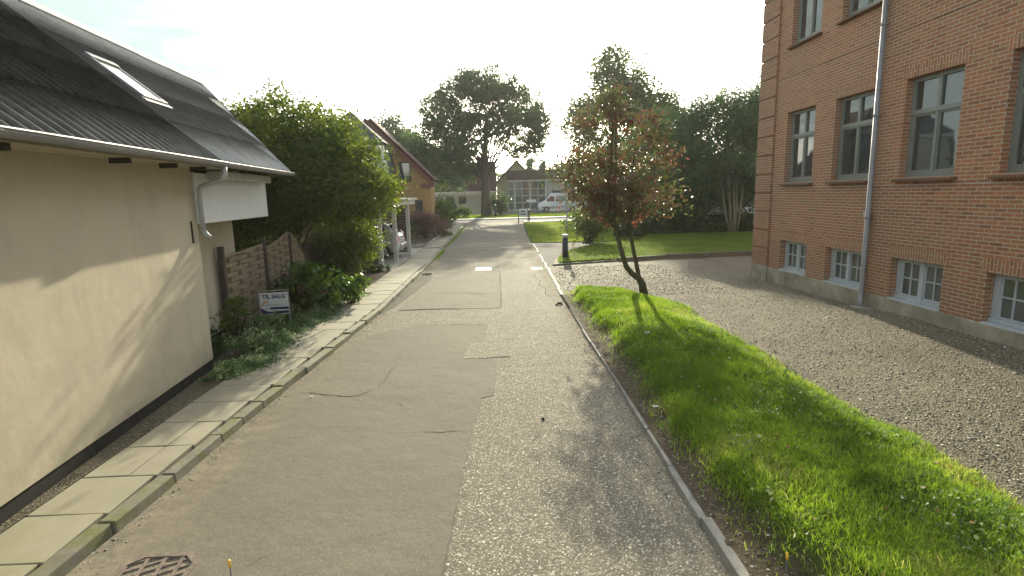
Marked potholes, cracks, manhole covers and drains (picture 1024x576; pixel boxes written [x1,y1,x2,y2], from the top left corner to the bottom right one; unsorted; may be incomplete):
drain grate [111,552,199,576]
